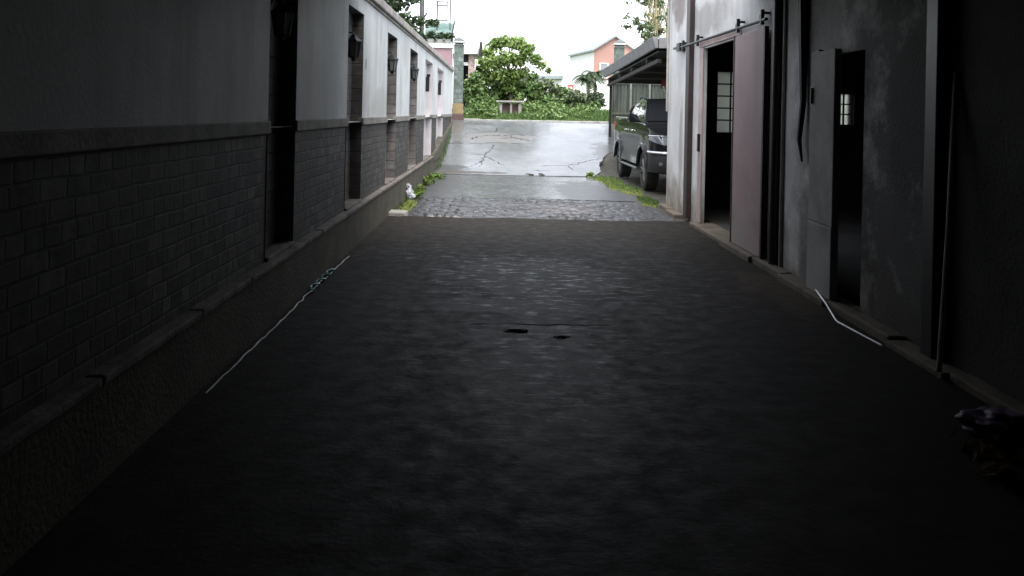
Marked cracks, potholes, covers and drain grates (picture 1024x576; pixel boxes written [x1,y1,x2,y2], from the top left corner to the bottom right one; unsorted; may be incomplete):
crack [471,128,530,166]
